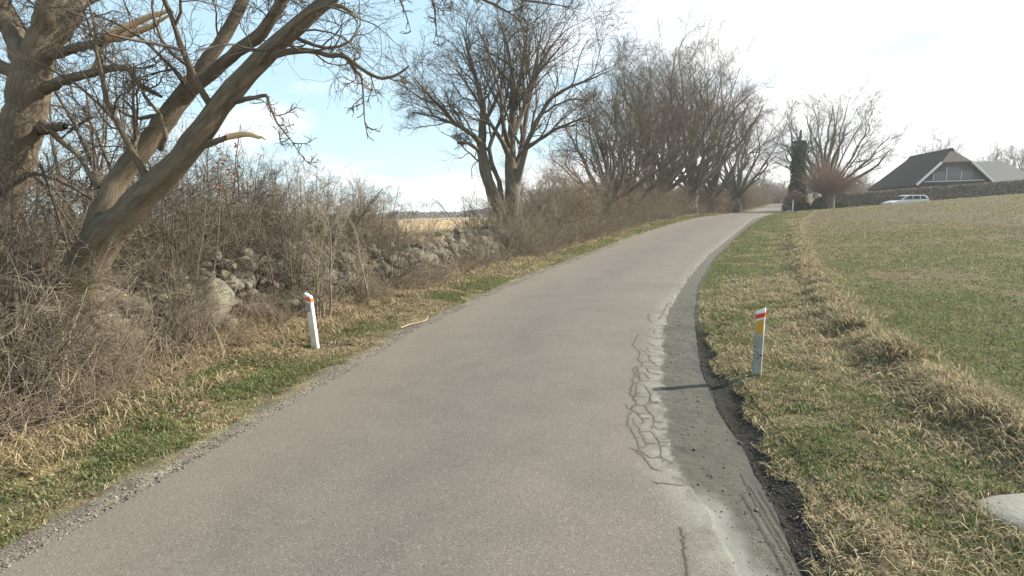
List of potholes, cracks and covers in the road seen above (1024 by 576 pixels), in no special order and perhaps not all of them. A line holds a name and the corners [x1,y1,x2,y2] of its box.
crack [679,527,688,576]
crack [626,303,682,486]
